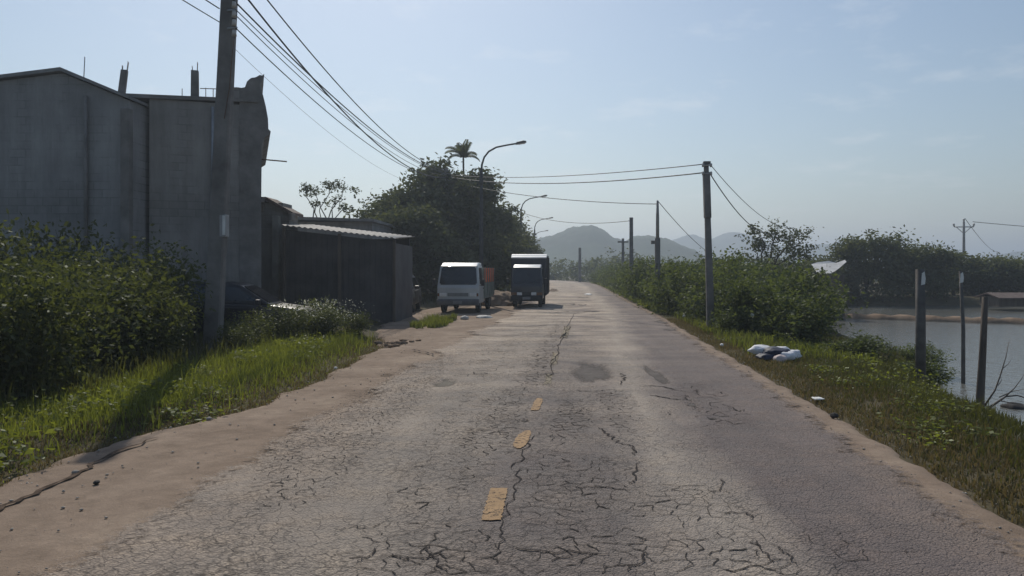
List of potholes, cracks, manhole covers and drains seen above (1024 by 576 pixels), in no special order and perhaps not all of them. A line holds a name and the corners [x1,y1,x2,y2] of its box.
crack [243,349,454,517]
crack [334,311,931,576]
